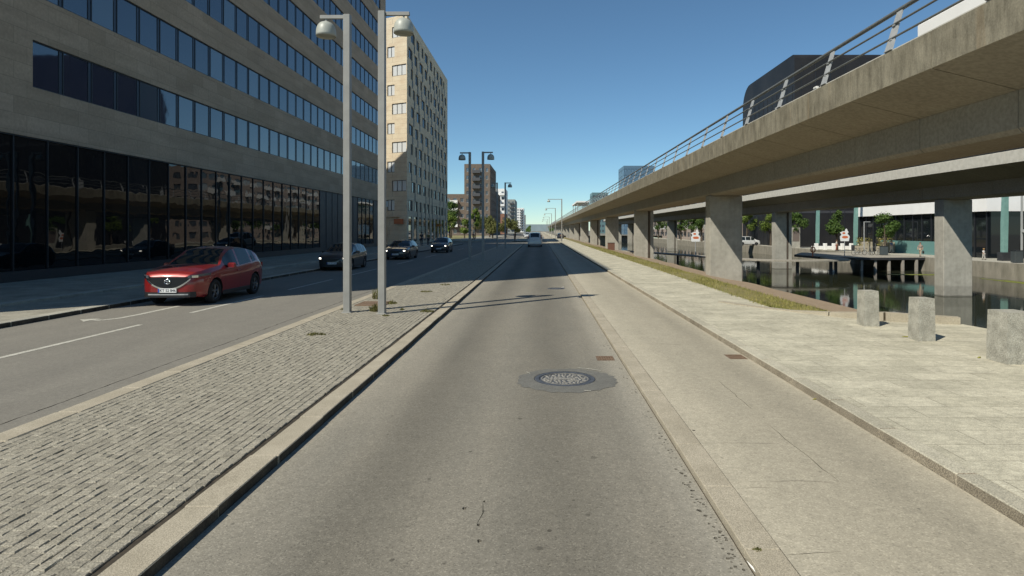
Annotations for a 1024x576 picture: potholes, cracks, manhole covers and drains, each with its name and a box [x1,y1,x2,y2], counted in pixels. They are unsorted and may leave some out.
manhole cover [535,372,595,386]
